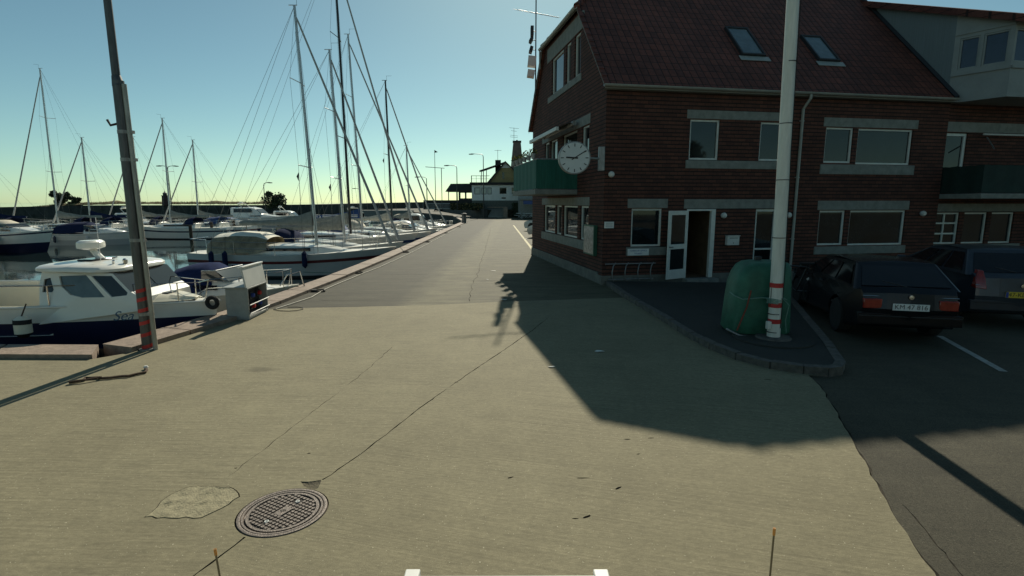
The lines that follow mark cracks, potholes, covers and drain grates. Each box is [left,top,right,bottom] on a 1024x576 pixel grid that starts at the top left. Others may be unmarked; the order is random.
manhole cover [235,489,329,538]
